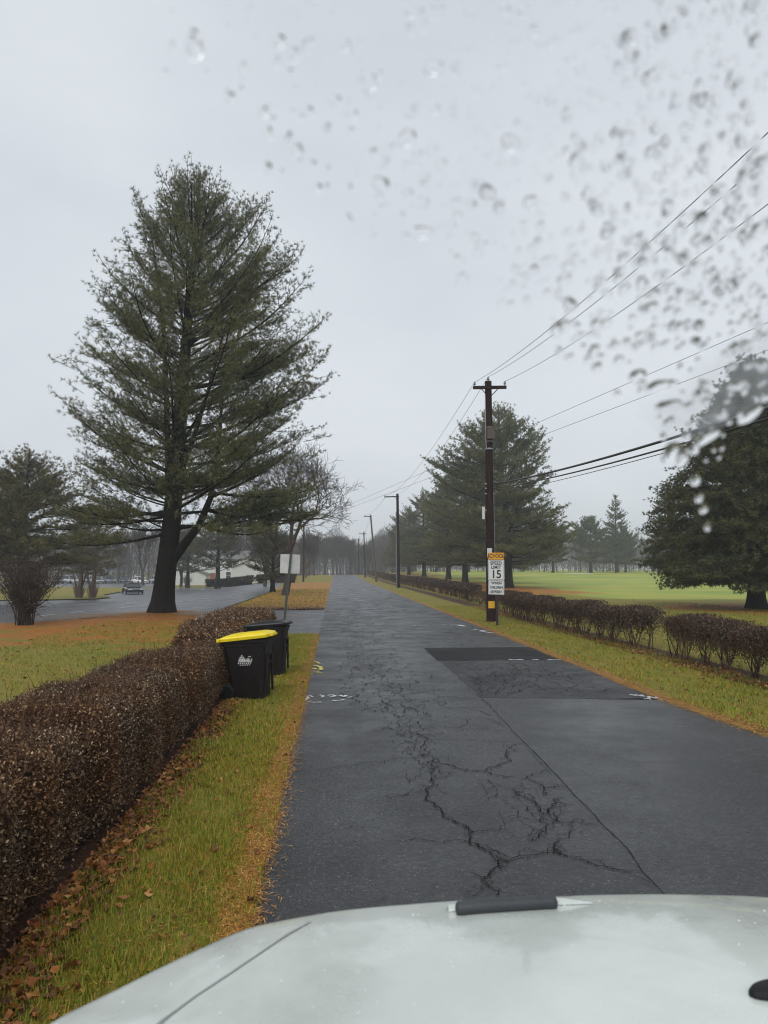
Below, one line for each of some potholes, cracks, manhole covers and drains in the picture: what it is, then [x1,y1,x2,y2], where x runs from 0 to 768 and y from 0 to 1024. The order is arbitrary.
crack [327,654,661,897]
crack [303,597,521,739]
